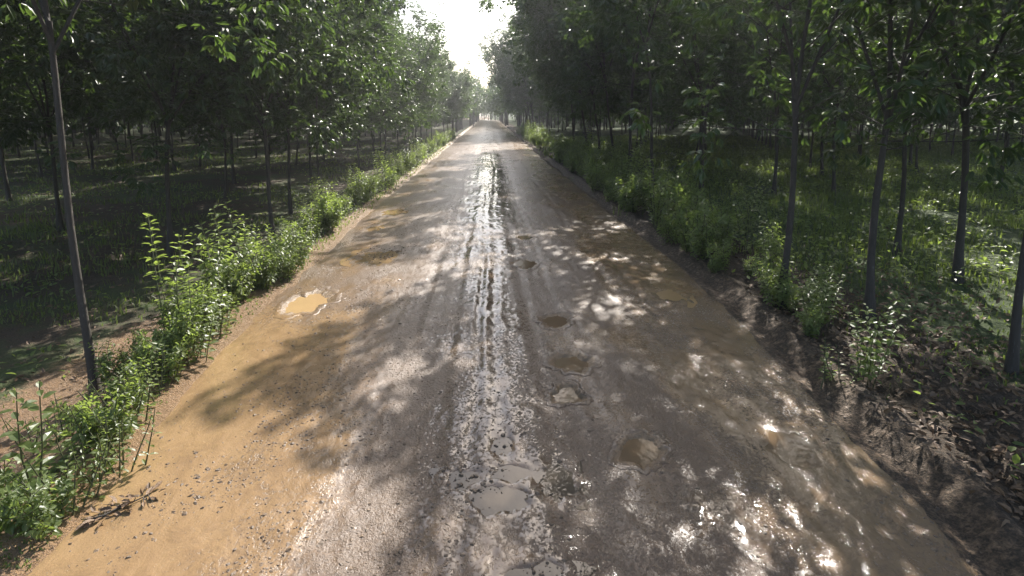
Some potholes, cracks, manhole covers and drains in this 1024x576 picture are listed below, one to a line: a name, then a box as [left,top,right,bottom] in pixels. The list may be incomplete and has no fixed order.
pothole [544,379,594,408]
pothole [542,348,603,377]
pothole [504,257,542,272]
pothole [511,232,540,241]
pothole [607,427,676,476]
pothole [533,310,578,330]
pothole [273,286,342,320]
